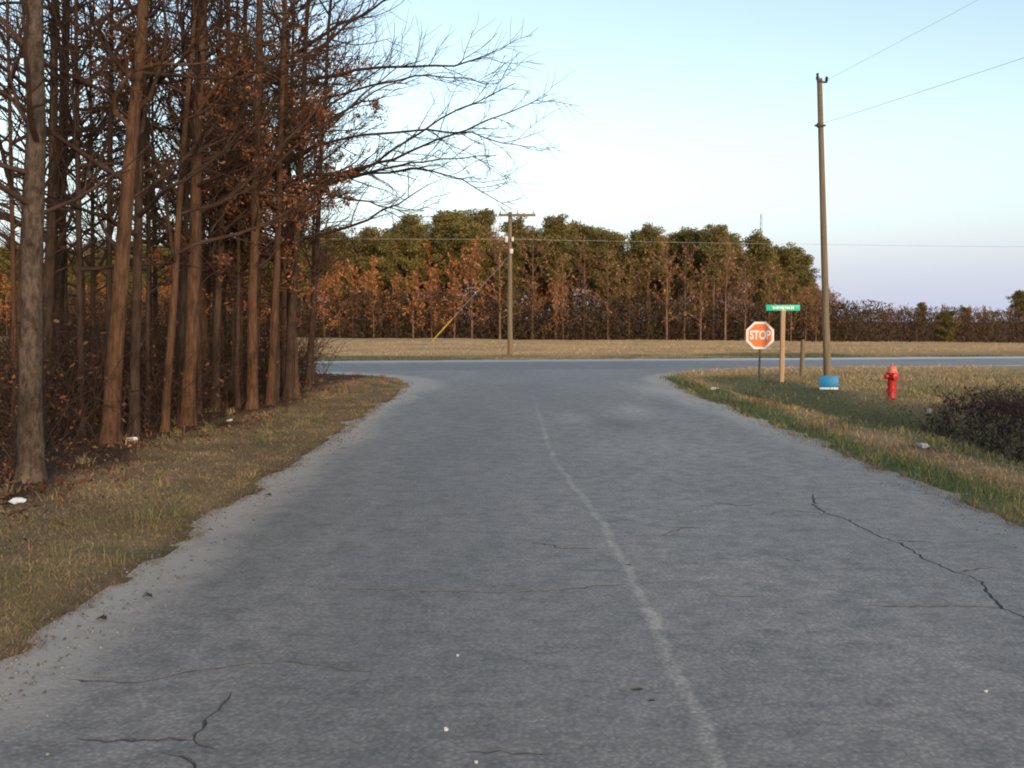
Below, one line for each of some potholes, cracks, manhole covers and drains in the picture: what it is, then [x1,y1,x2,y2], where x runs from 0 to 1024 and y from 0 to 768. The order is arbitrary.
crack [72,660,374,768]
crack [326,584,626,593]
crack [770,494,1024,618]
